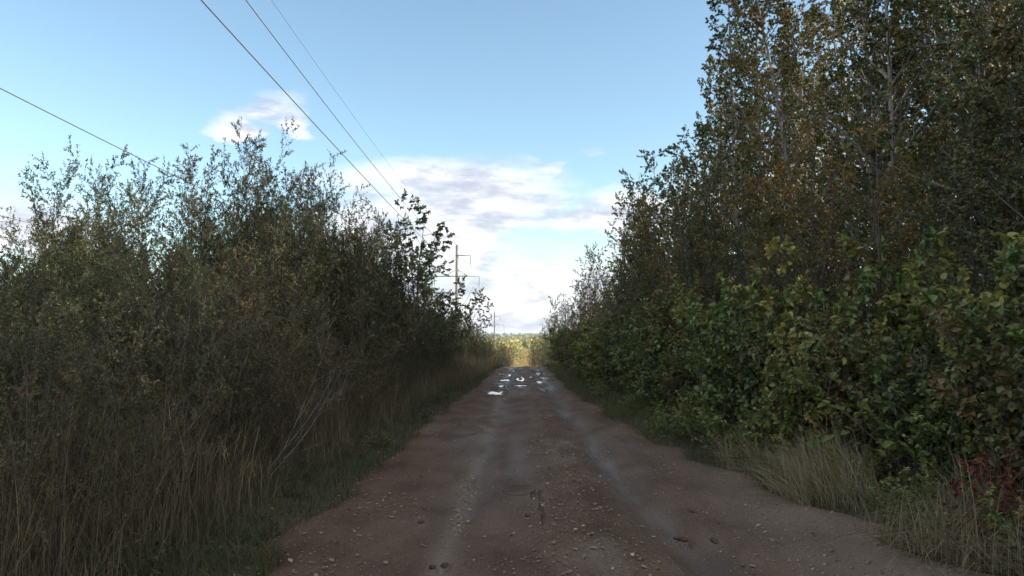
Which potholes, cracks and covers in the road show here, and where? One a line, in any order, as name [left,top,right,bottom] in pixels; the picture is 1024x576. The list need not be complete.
crack [531,491,546,525]
pothole [481,388,509,396]
